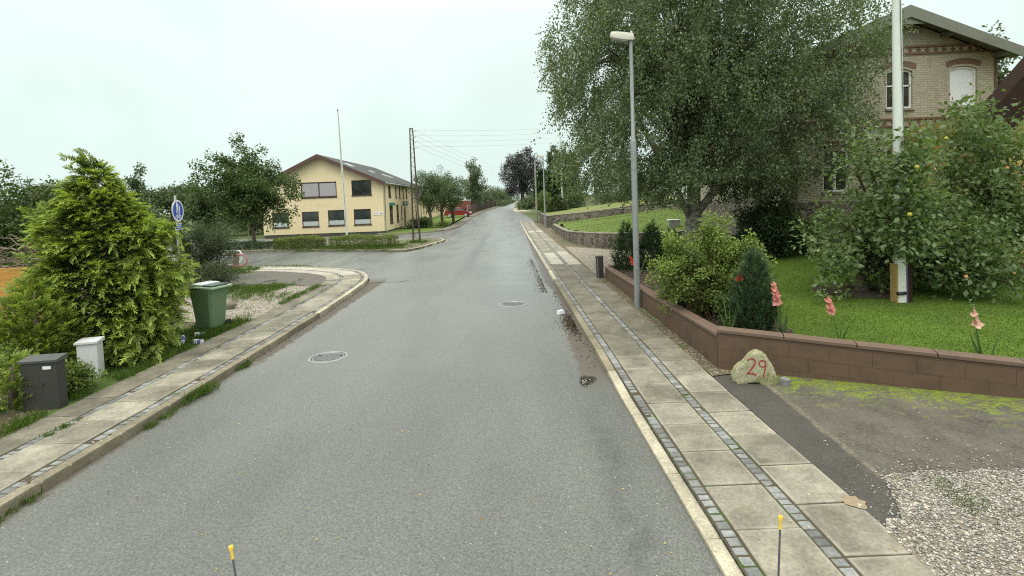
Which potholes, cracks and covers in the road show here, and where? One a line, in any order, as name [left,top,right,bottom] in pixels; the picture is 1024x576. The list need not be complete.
pothole [579,375,597,387]
manhole cover [308,351,348,363]
